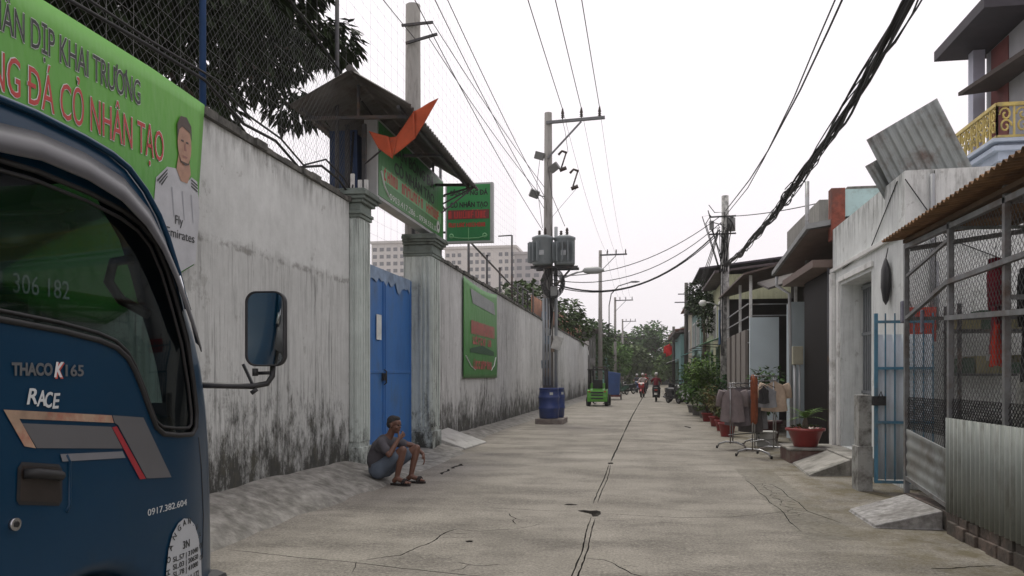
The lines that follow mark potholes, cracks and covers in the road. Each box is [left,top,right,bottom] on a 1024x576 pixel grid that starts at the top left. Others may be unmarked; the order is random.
crack [352,513,538,572]
crack [746,480,835,532]
